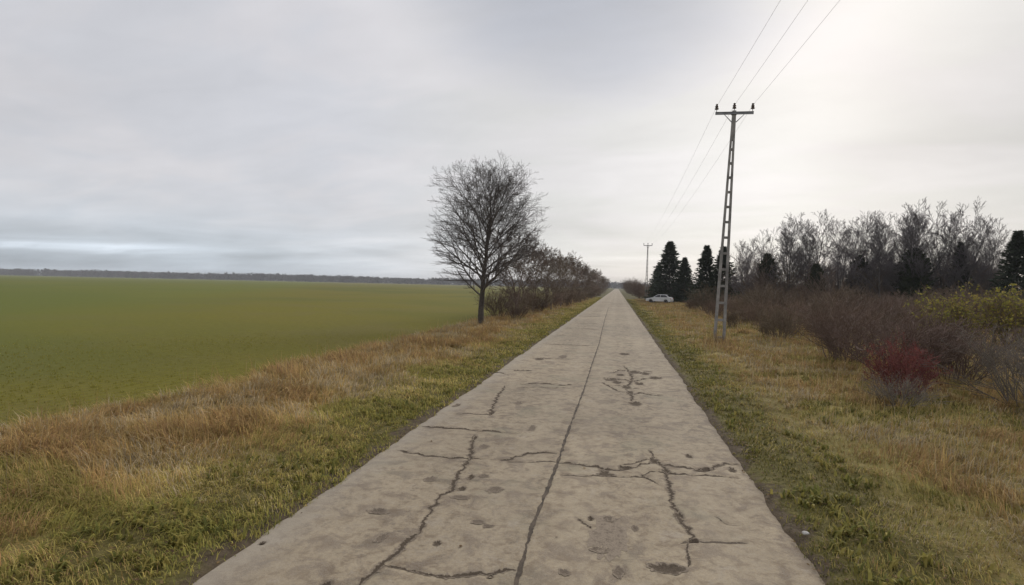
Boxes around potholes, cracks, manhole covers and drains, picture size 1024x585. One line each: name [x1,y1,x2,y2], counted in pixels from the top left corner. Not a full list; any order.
crack [603,366,661,402]
crack [502,450,748,567]
crack [359,370,572,585]
pothole [646,562,689,575]
